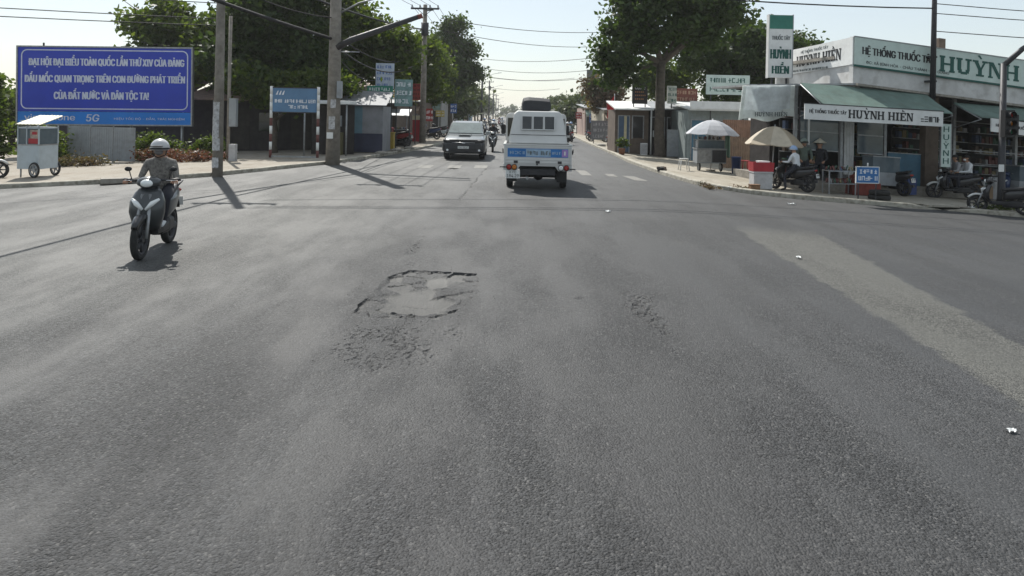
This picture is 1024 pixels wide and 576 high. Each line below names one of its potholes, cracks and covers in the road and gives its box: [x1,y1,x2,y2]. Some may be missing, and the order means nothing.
crack [318,318,475,381]
pothole [354,270,480,321]
crack [608,287,692,360]
